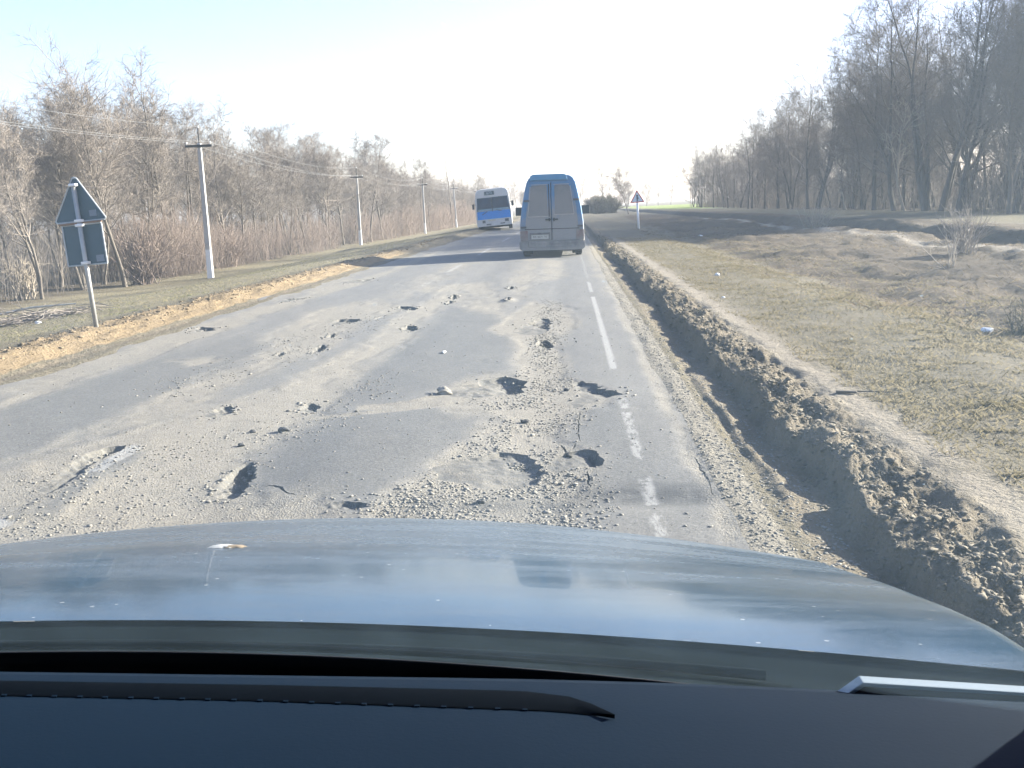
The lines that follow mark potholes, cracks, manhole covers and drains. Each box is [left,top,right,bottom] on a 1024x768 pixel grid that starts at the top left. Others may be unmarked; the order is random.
pothole [297,403,320,413]
pothole [570,381,623,408]
pothole [513,319,554,336]
pothole [547,449,605,473]
pothole [432,452,547,490]
pothole [38,445,126,494]
pothole [210,462,257,502]
pothole [448,377,527,399]
crack [263,485,296,496]
crack [560,413,591,487]
pothole [322,501,370,510]
pothole [203,407,237,419]
